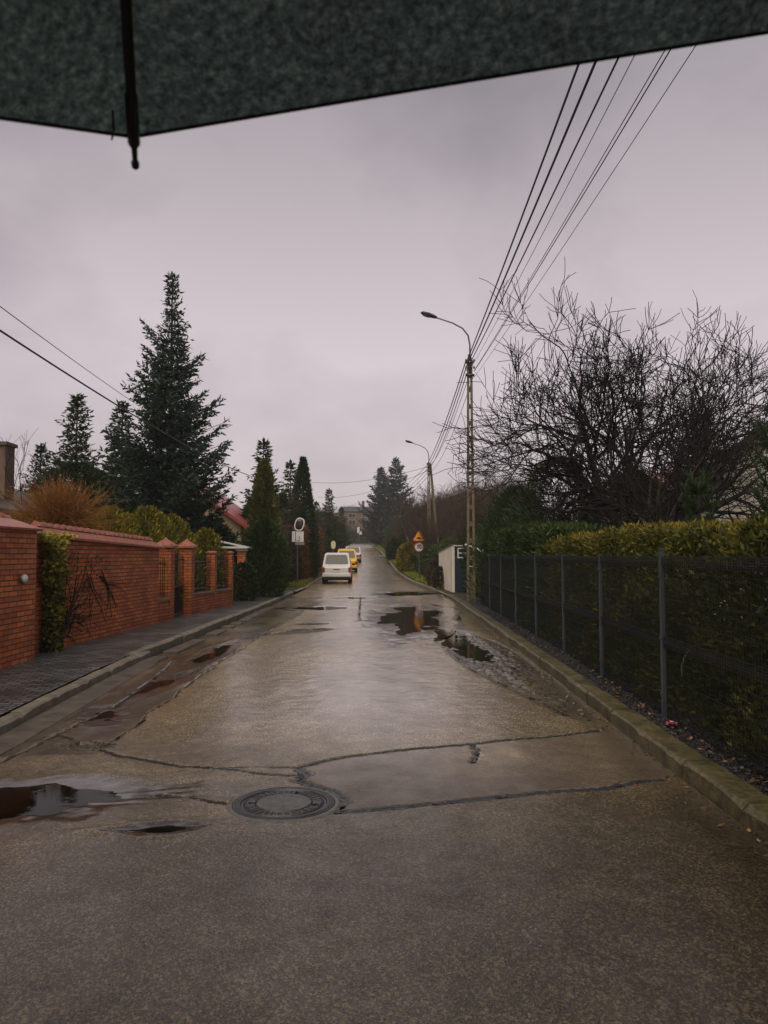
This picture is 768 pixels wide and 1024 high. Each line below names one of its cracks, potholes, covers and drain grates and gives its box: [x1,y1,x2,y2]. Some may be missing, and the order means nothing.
manhole cover [226,786,341,823]
crack [154,795,227,804]
